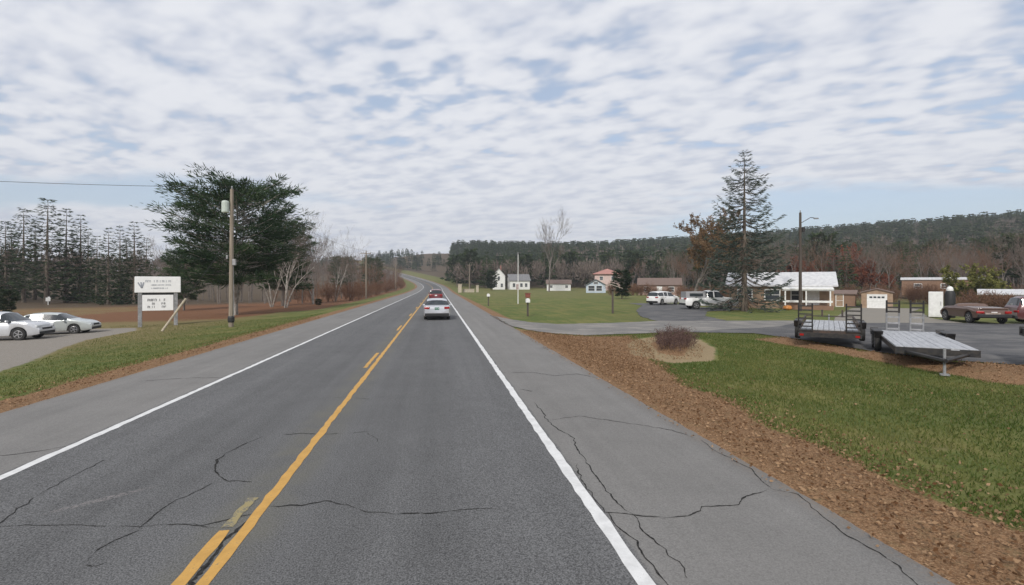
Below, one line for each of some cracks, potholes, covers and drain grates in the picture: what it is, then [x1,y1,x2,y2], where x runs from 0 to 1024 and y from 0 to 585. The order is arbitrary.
crack [0,441,493,585]
crack [535,403,918,585]
